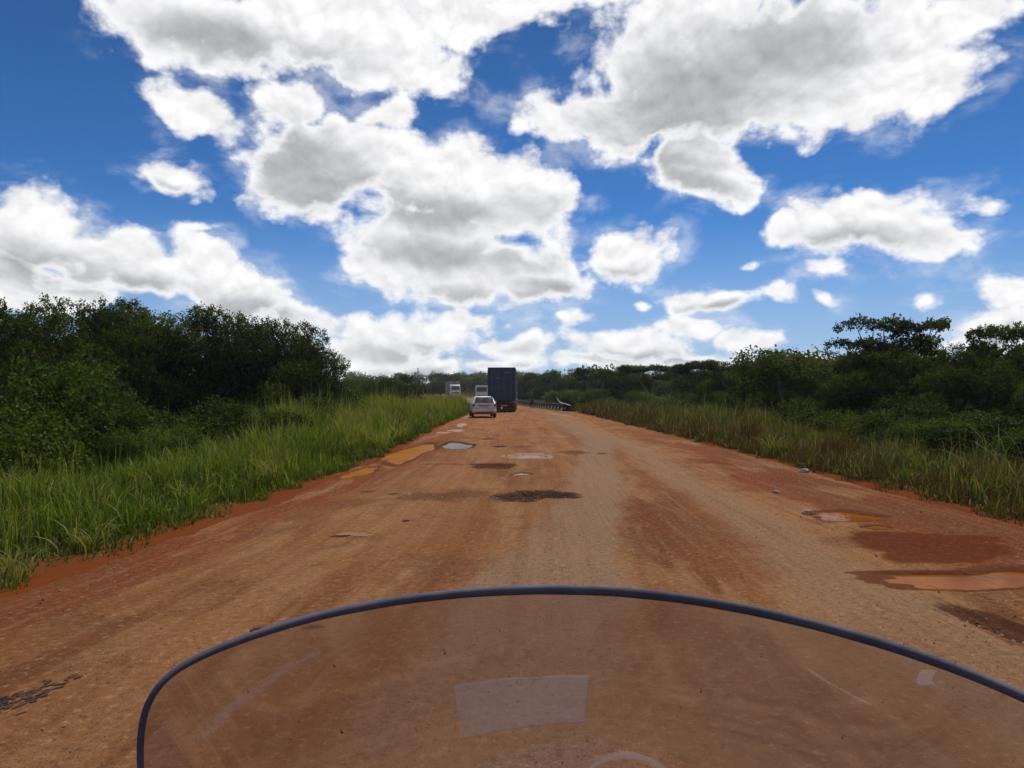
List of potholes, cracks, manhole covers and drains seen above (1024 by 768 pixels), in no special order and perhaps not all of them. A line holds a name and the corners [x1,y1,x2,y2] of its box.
pothole [486,489,588,504]
crack [0,673,83,715]
